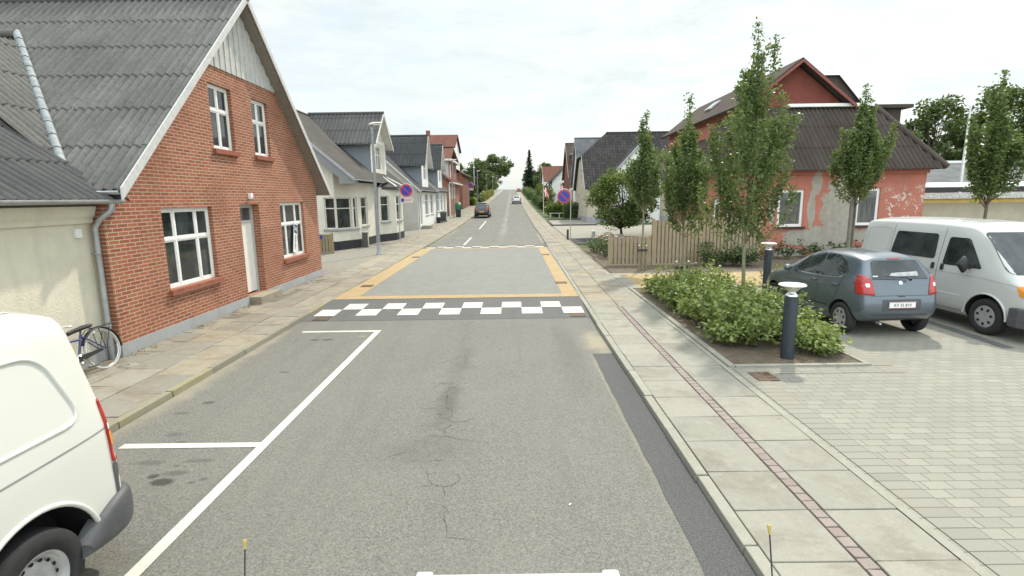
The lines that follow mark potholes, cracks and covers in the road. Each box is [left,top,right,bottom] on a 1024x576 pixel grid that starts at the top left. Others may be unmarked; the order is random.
crack [417,470,468,539]
drain grate [748,372,780,381]
